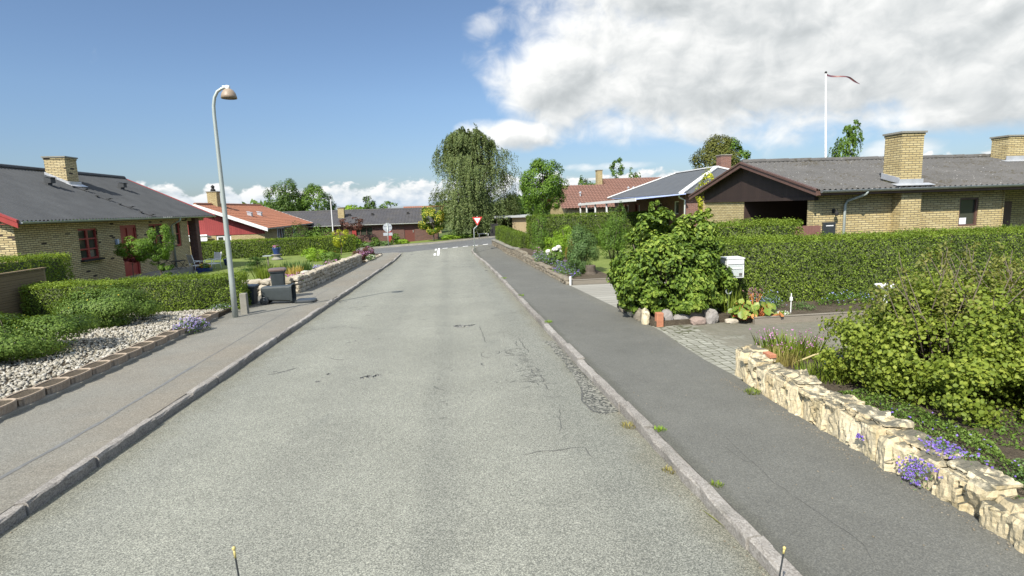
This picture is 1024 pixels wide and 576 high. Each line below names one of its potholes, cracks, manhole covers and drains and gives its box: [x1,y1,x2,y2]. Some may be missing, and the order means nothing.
crack [479,327,592,457]
